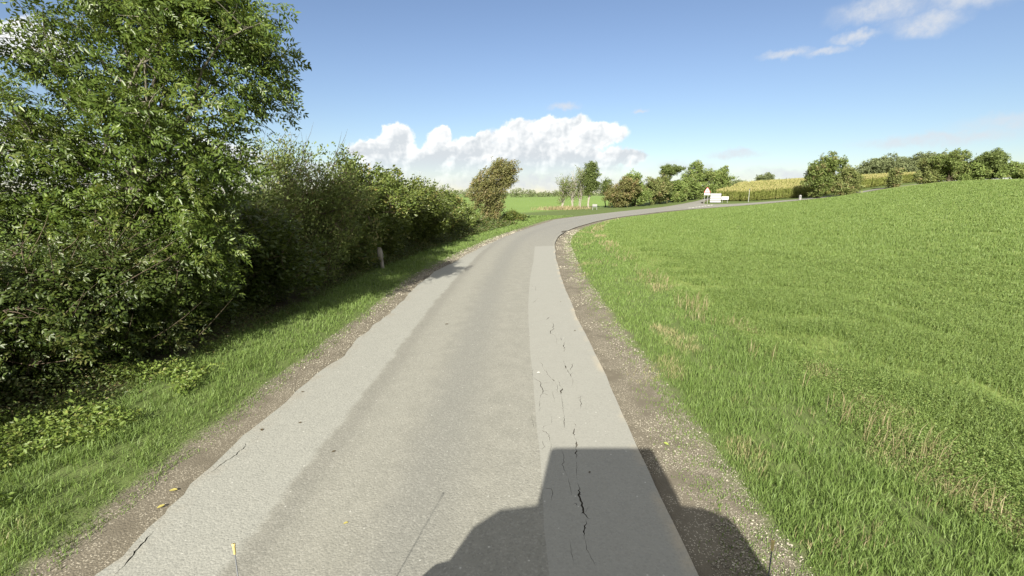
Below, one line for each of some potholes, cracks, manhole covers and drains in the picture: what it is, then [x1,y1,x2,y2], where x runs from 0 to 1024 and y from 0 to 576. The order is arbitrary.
crack [531,365,595,564]
crack [118,532,153,571]
